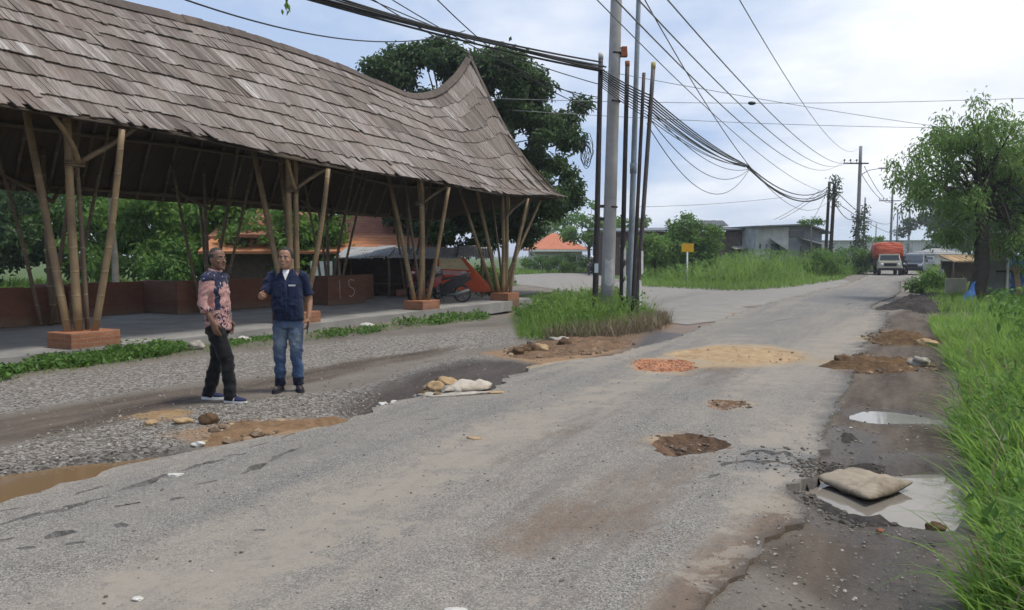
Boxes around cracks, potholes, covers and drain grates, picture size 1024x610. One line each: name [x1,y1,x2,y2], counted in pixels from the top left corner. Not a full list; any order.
pothole [652,433,731,457]
pothole [707,400,751,410]
crack [707,450,794,478]
